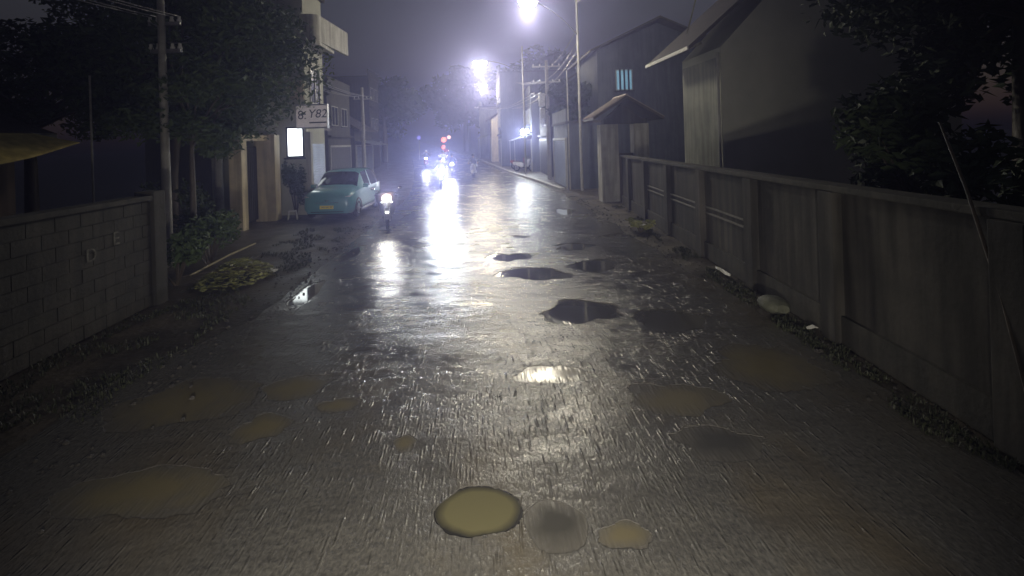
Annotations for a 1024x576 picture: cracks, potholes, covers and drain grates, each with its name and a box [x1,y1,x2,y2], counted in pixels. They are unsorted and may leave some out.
pothole [564,259,618,273]
pothole [631,309,711,333]
pothole [493,267,574,281]
pothole [484,253,534,262]
pothole [512,365,598,383]
pothole [539,299,624,326]
